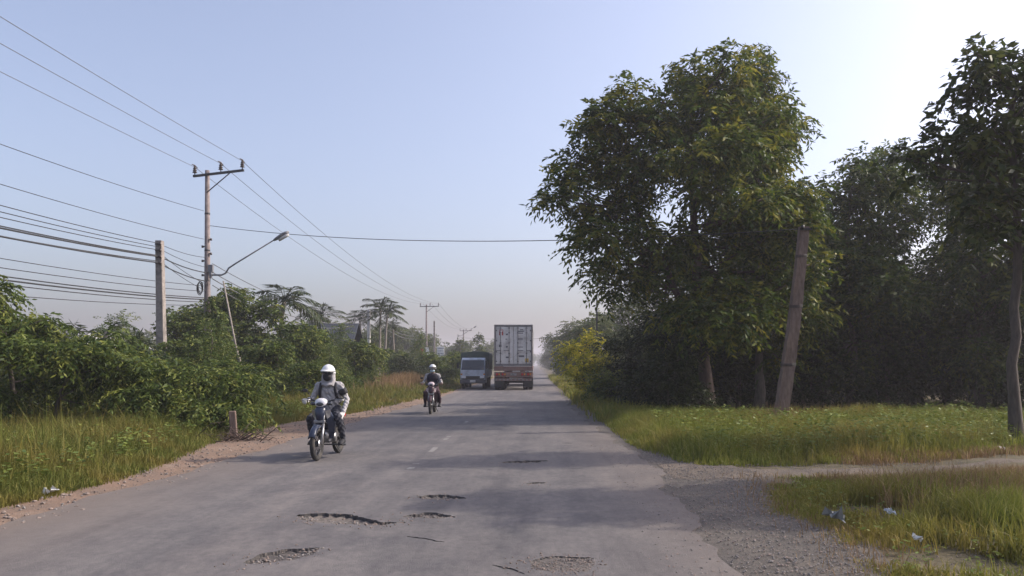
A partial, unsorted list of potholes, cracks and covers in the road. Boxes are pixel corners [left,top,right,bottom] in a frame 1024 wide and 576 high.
pothole [380,512,455,522]
pothole [277,511,410,529]
pothole [405,493,466,503]
pothole [207,544,331,572]
pothole [502,552,610,576]
